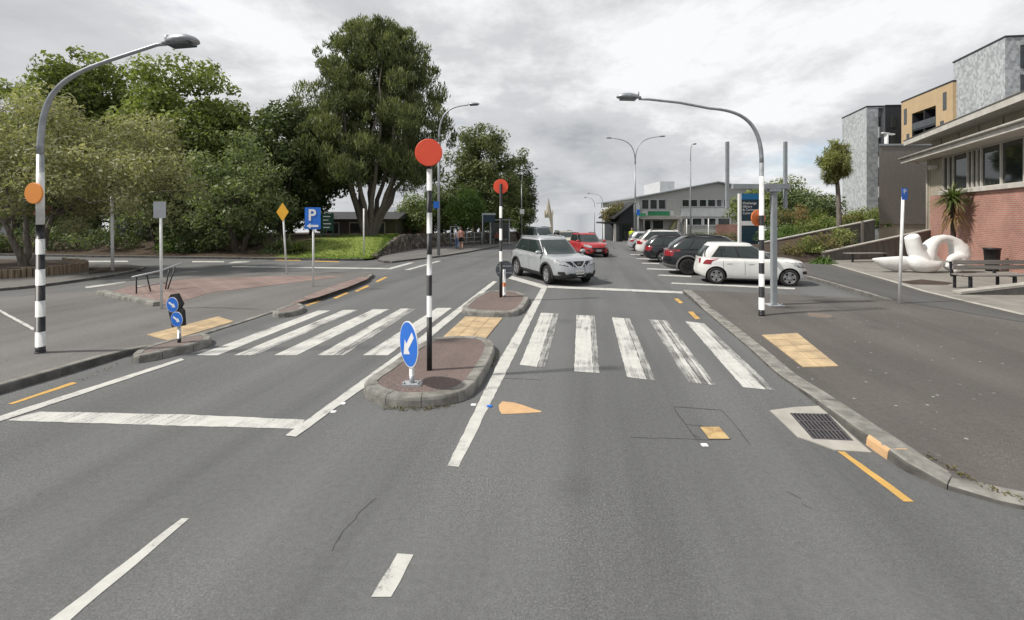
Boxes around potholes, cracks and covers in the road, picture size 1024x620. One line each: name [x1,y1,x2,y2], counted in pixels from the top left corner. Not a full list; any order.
drain grate [770,406,872,453]
